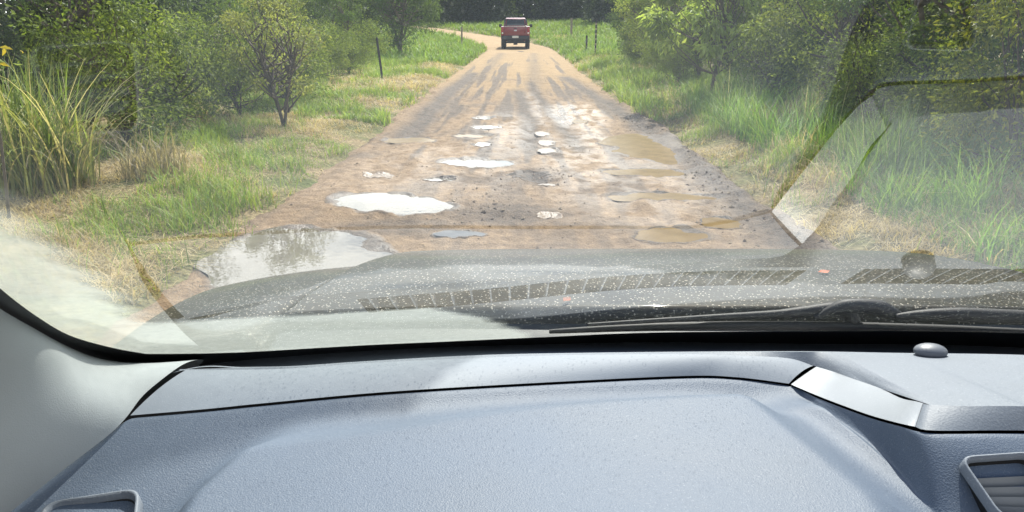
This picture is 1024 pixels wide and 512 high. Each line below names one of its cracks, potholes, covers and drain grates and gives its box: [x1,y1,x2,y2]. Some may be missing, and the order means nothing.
pothole [430,229,489,239]
pothole [628,224,714,245]
pothole [536,147,561,155]
pothole [596,166,703,179]
pothole [324,191,465,218]
pothole [599,190,734,203]
pothole [362,171,396,179]
pothole [595,132,691,166]
pothole [536,211,564,219]
pothole [191,224,402,290]
pothole [433,156,519,169]
